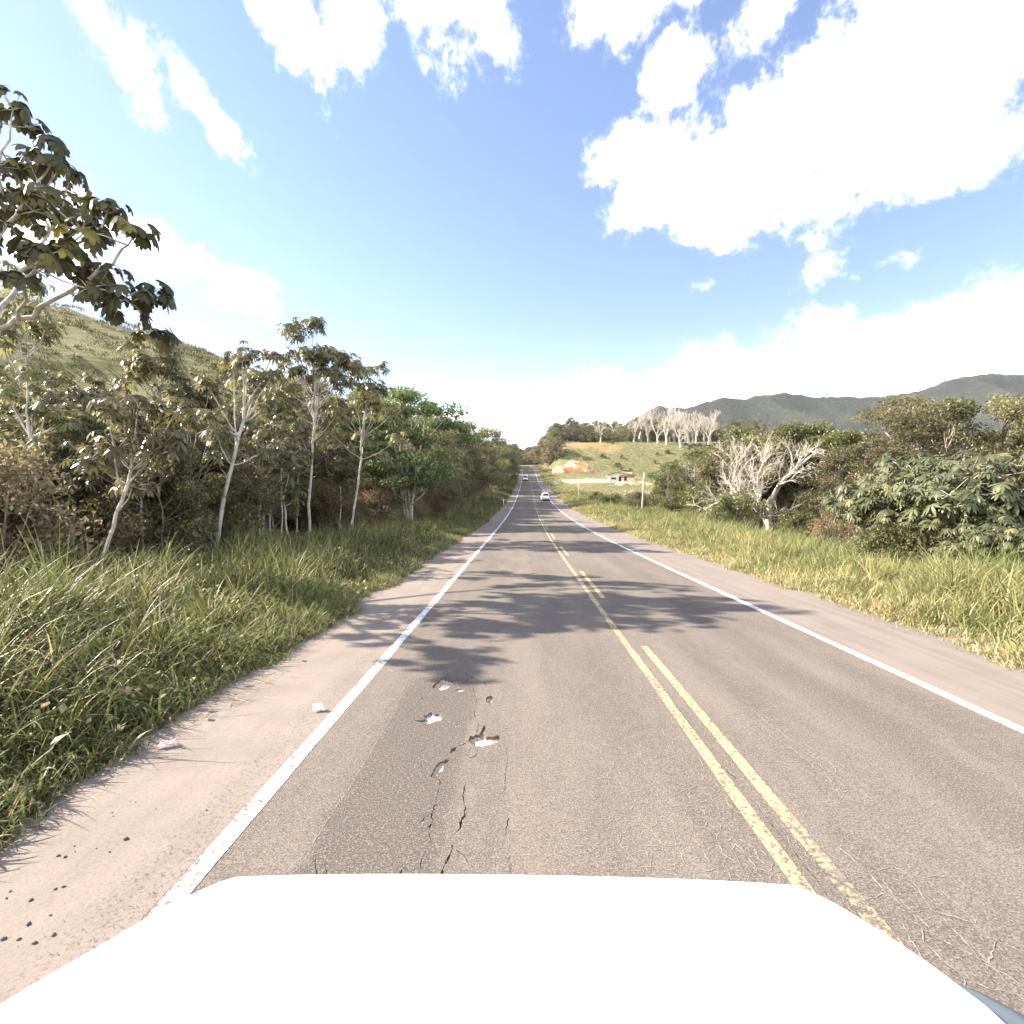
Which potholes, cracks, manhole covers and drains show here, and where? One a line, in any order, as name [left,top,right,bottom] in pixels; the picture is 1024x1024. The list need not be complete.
pothole [468,725,504,749]
pothole [431,759,450,778]
crack [310,668,407,875]
crack [399,779,468,874]
crack [502,752,512,875]
pothole [432,677,456,690]
pothole [415,712,444,724]
